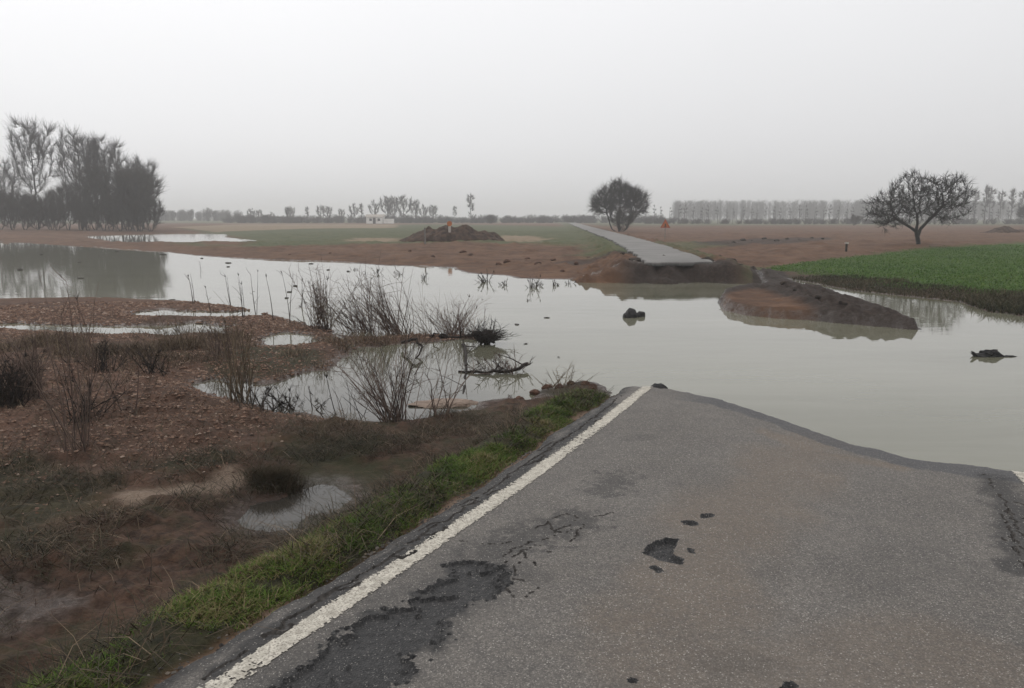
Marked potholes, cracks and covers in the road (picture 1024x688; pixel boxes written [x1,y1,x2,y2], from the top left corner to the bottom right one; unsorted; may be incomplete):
pothole [641,537,684,565]
crack [982,474,1024,567]
crack [201,395,622,681]
